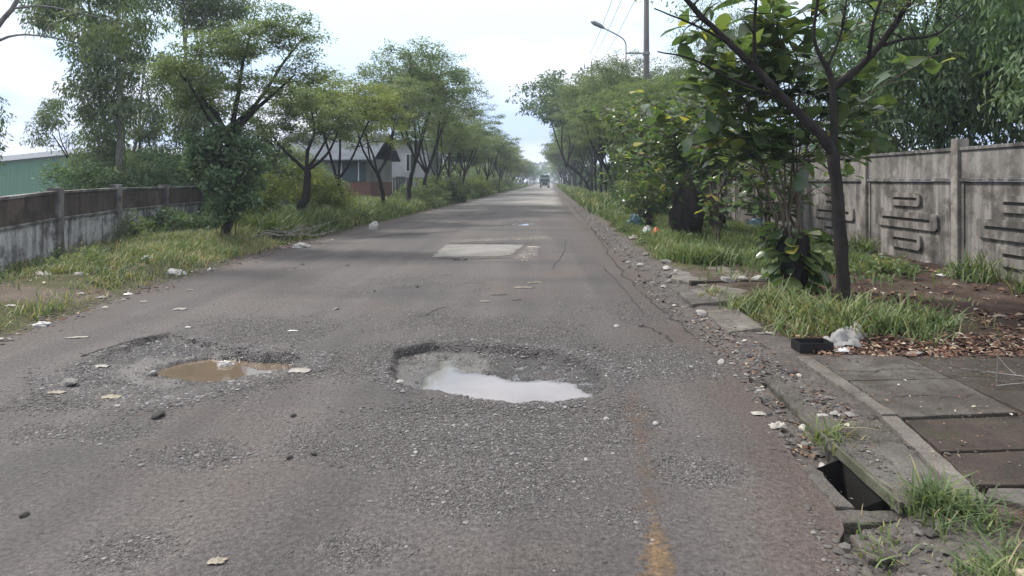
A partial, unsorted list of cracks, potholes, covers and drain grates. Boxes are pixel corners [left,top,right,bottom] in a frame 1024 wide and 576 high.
crack [591,228,694,342]
pothole [18,330,337,417]
drain grate [800,432,903,534]
pothole [368,337,633,412]
